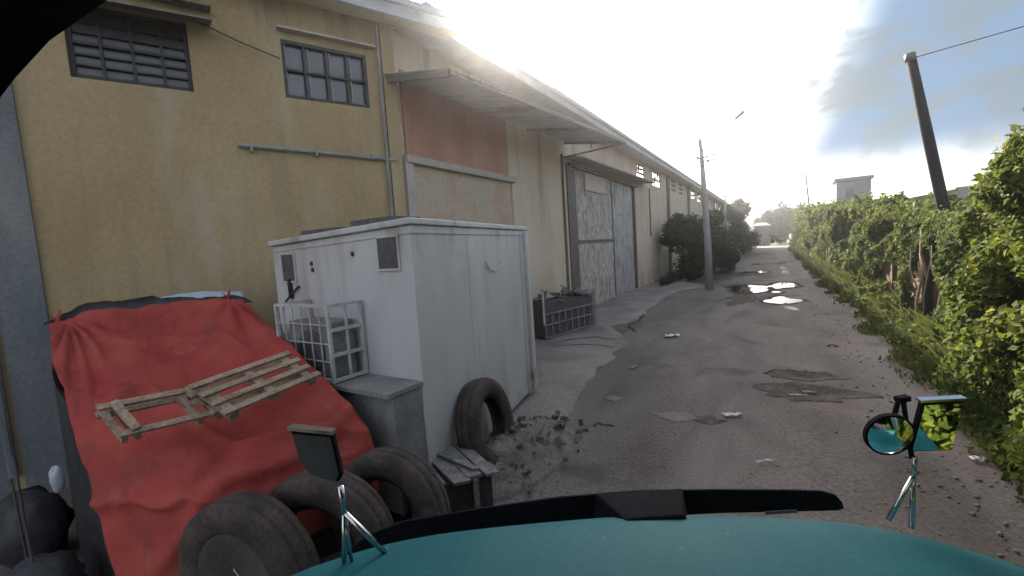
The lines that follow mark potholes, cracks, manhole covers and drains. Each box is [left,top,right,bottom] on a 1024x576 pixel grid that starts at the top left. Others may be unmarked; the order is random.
pothole [762,369,853,382]
pothole [765,282,805,290]
crack [558,314,644,347]
pothole [724,284,773,295]
pothole [750,381,884,403]
pothole [759,294,809,305]
